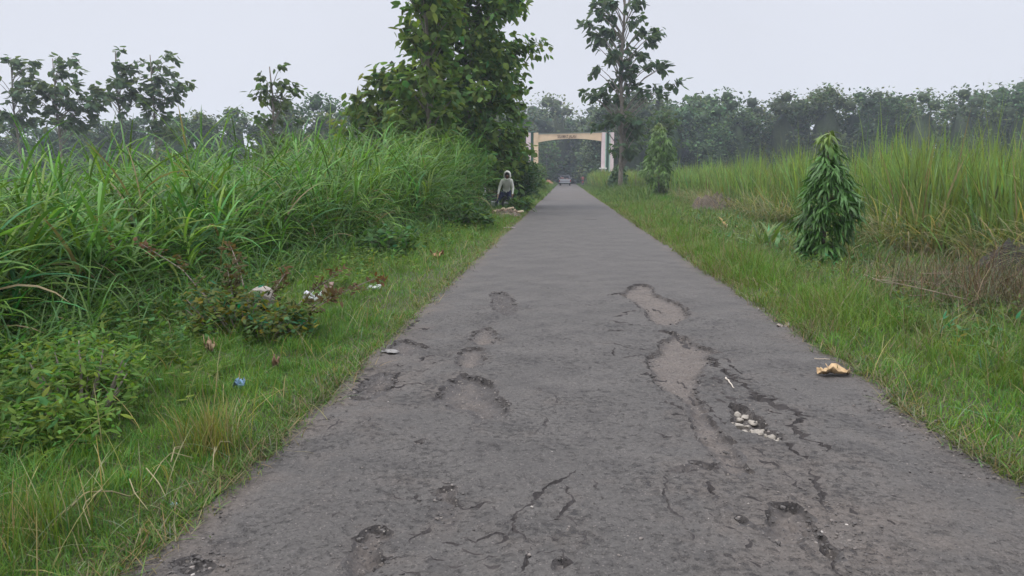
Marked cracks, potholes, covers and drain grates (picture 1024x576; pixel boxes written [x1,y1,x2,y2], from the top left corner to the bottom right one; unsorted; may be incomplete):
pothole [453,347,488,369]
pothole [489,291,519,316]
crack [332,470,598,576]
crack [605,293,905,575]
pothole [427,373,512,424]
pothole [759,501,848,563]
pothole [728,402,785,440]
pothole [467,327,502,345]
pothole [619,283,692,326]
pothole [643,330,755,479]
pothole [332,525,394,576]
